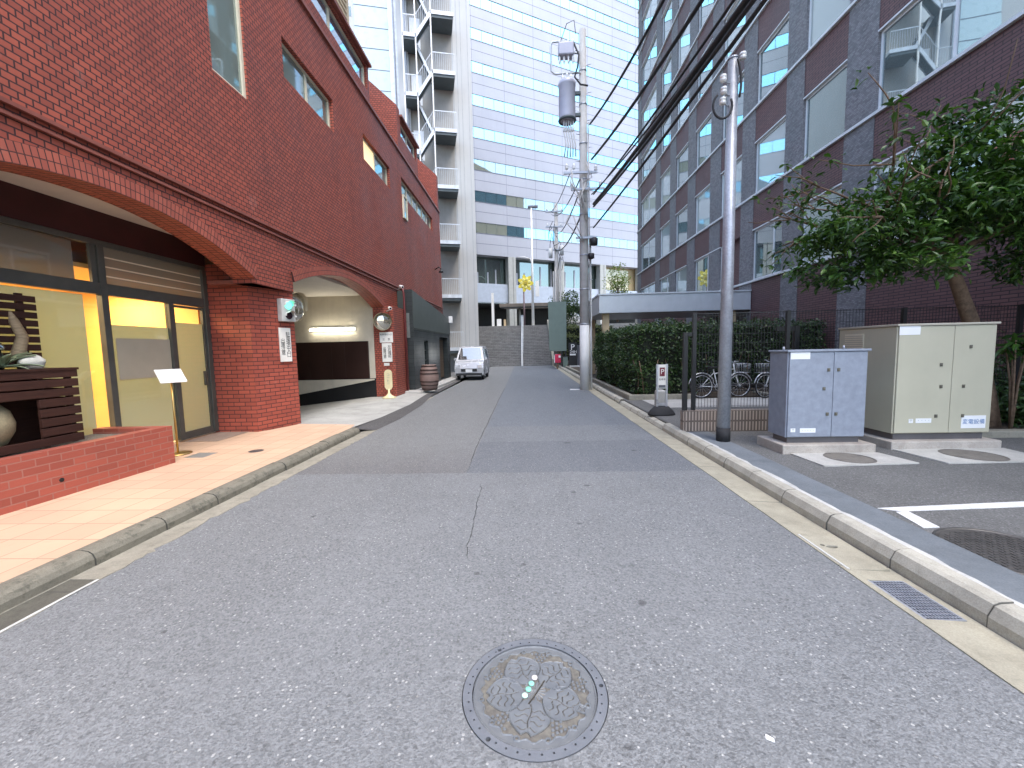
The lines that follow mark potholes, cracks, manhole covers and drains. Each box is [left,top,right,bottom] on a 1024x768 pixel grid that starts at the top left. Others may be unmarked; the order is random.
manhole cover [463,639,608,763]
crack [455,484,482,587]
manhole cover [938,449,1010,461]
manhole cover [933,527,1024,575]
manhole cover [823,453,877,464]
drain grate [868,580,967,622]
